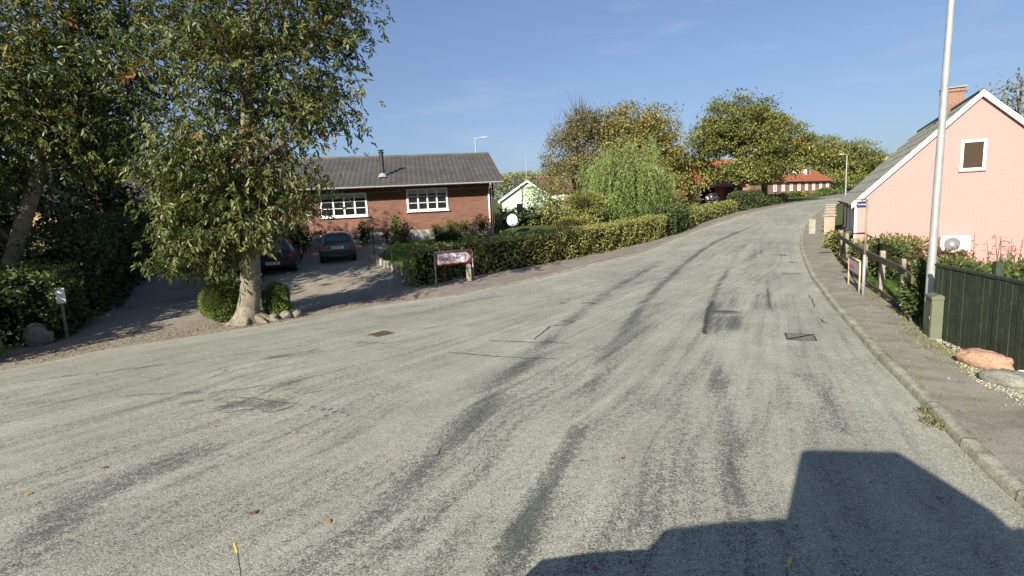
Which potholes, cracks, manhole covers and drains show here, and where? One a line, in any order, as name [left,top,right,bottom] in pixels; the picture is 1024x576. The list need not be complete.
crack [450,321,575,359]
